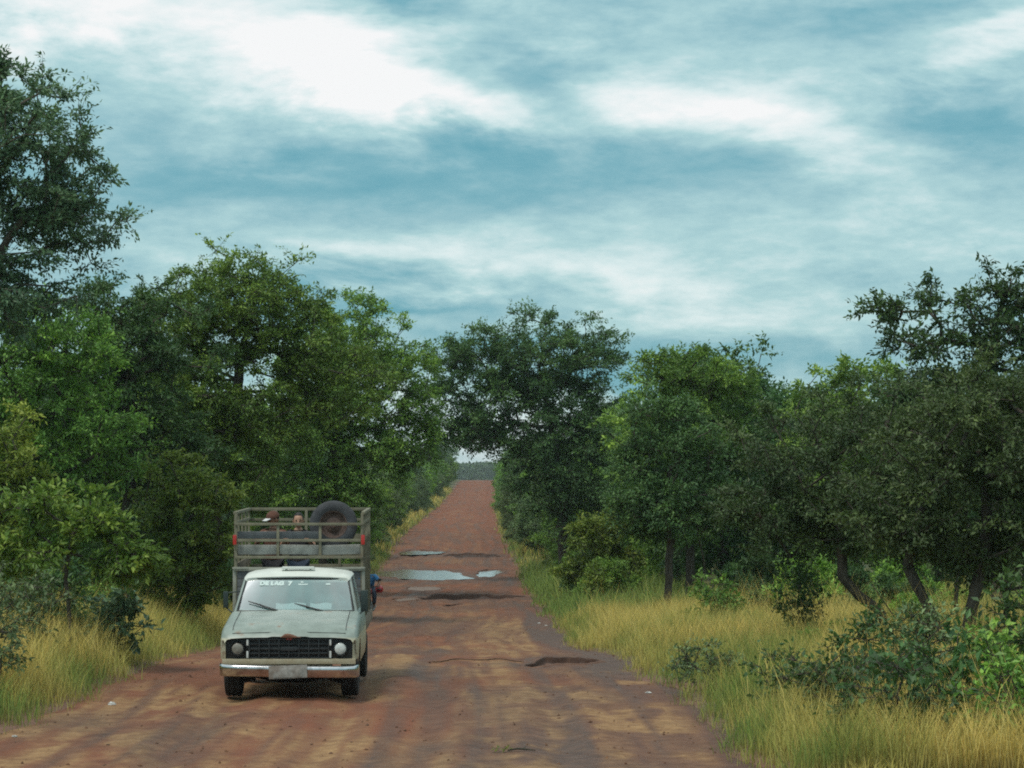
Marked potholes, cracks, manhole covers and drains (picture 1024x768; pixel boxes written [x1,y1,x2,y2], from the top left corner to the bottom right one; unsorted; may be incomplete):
pothole [473,568,507,578]
pothole [519,657,605,668]
pothole [396,549,449,557]
pothole [374,568,481,582]
pothole [412,593,532,601]
